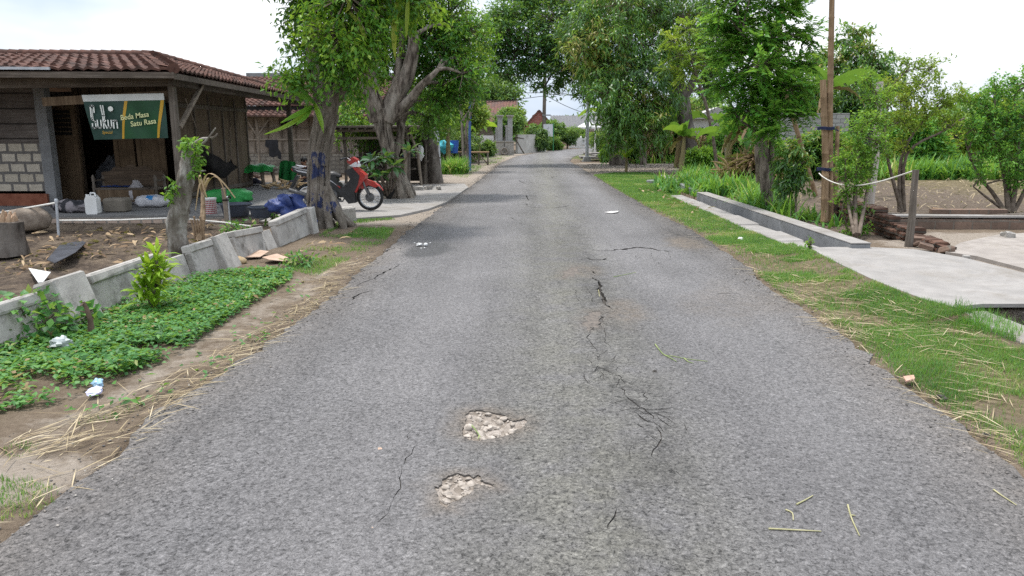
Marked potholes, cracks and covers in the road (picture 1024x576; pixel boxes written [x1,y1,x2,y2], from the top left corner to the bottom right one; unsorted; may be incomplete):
pothole [462,410,527,441]
crack [575,247,687,476]
crack [348,247,399,306]
pothole [434,473,494,507]
crack [378,430,414,522]
